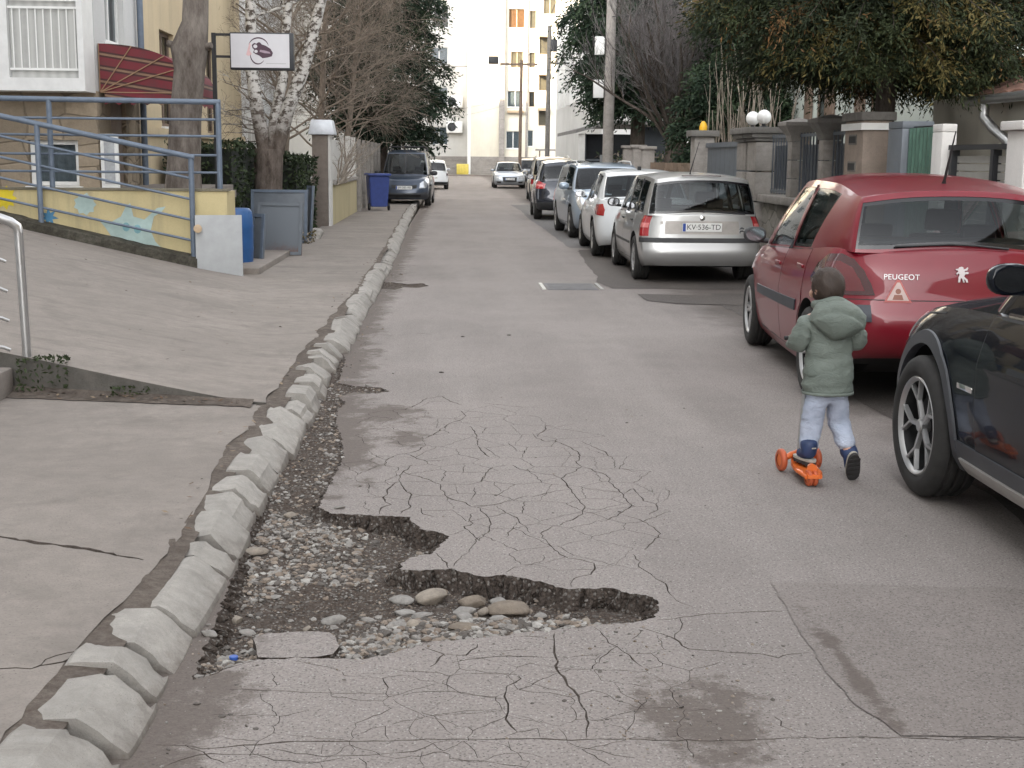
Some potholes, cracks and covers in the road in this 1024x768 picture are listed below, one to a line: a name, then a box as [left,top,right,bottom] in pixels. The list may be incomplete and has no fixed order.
crack [0,651,75,669]
crack [168,611,1024,768]
crack [345,396,695,608]
pothole [192,356,659,680]
